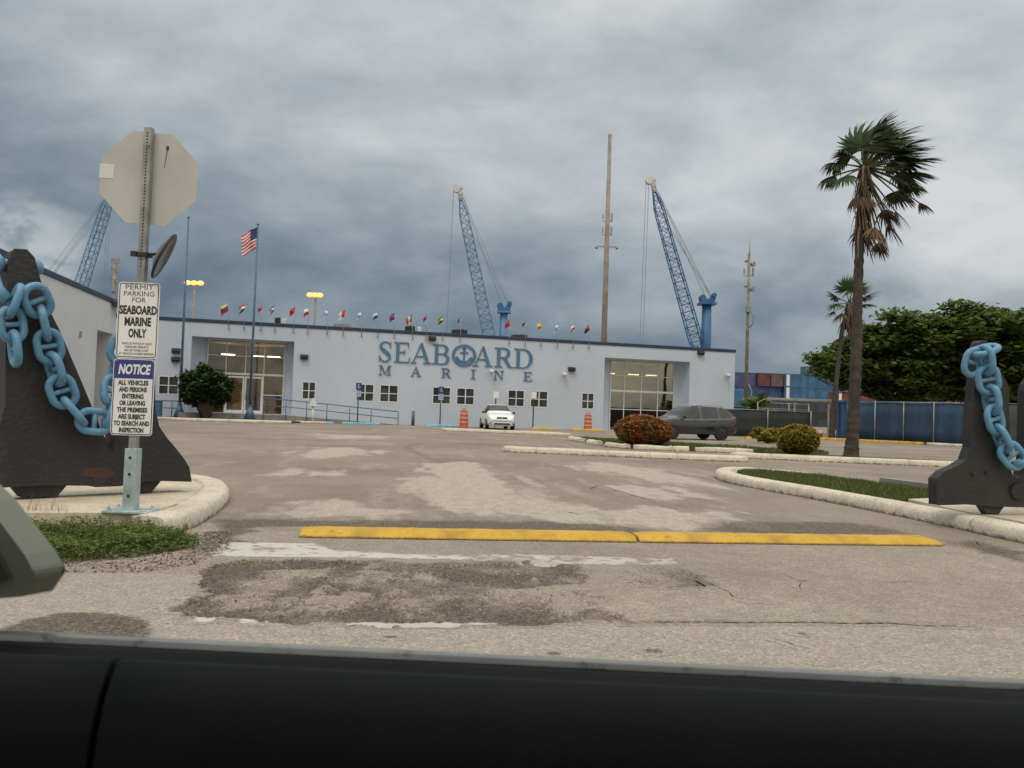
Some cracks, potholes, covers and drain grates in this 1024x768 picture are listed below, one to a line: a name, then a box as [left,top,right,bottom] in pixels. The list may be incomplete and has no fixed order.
crack [694,579,761,604]
